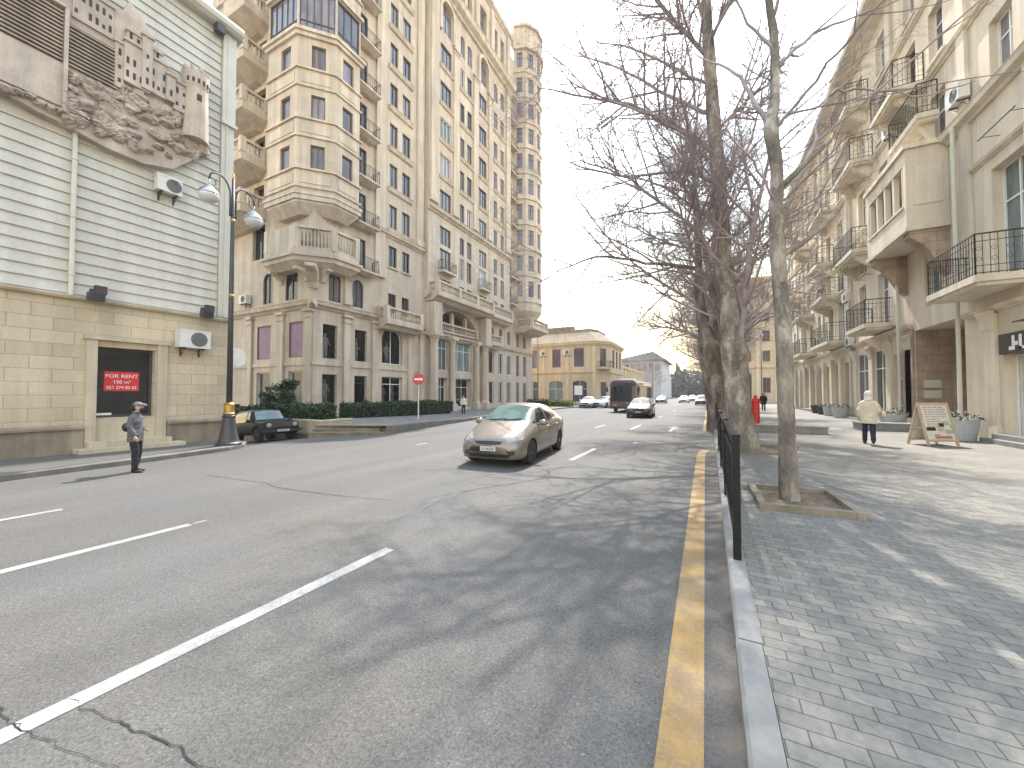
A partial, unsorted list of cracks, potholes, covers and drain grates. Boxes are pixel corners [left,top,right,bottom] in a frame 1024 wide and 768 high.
crack [0,698,213,768]
